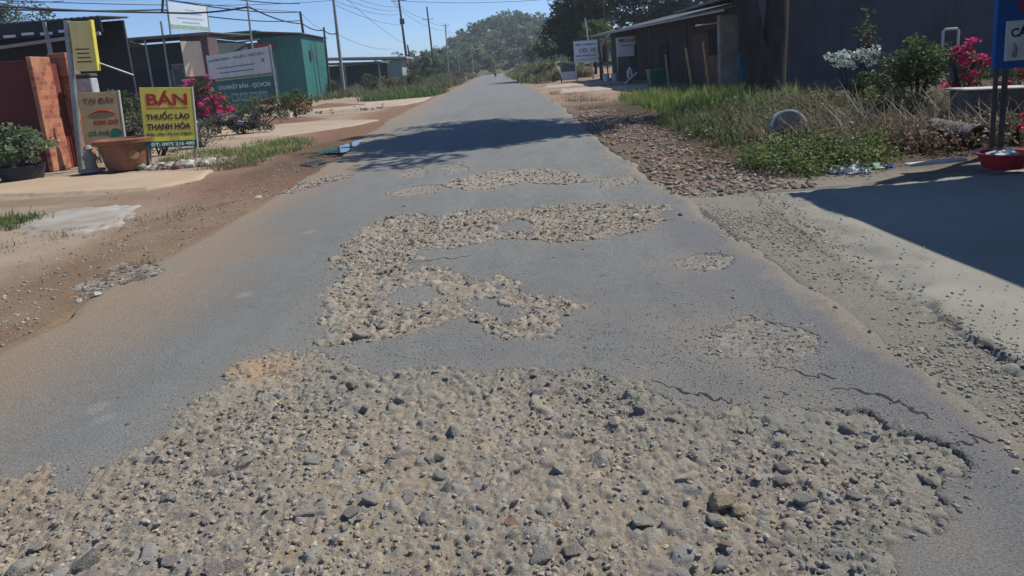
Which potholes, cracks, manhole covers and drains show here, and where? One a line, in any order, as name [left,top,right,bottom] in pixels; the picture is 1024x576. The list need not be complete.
crack [774,366,931,419]
pothole [0,348,972,576]
crack [653,381,732,404]
pothole [444,168,595,190]
pothole [313,202,674,347]
crack [943,435,994,446]
pothole [276,175,353,195]
